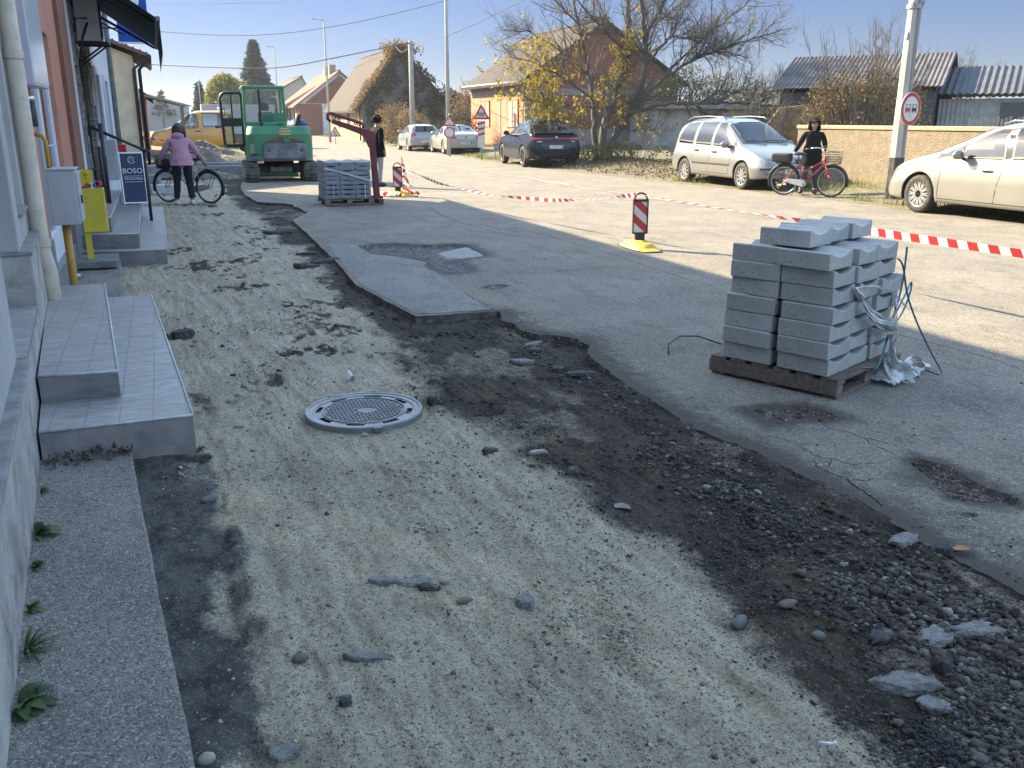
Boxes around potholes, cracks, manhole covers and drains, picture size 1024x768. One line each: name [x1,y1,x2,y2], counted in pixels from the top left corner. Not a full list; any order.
pothole [907,457,1024,507]
crack [772,427,898,507]
manhole cover [305,390,423,434]
pothole [751,405,838,424]
